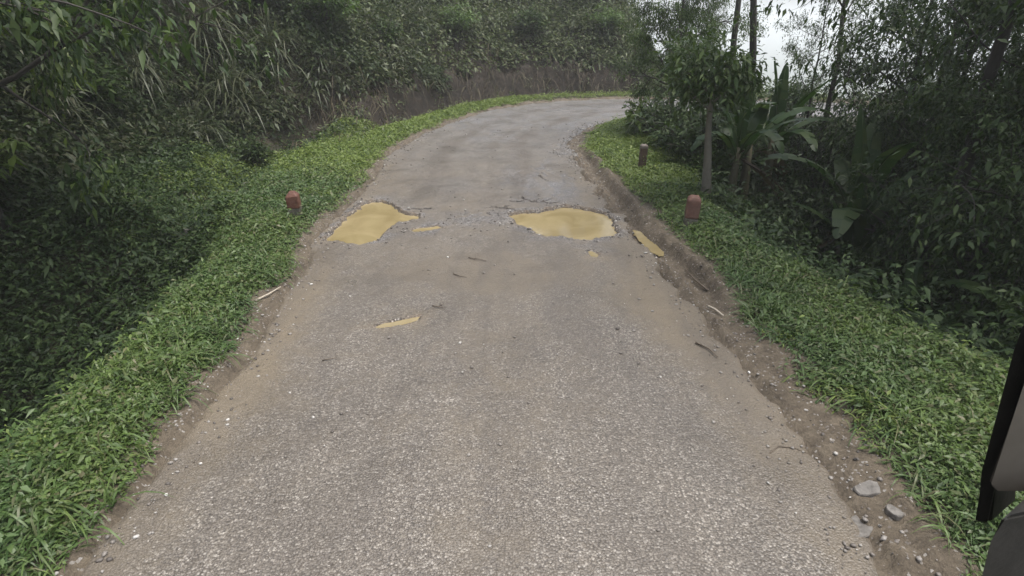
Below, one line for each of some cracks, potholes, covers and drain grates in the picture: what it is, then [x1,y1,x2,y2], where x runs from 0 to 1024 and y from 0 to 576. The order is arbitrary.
pothole [504,203,624,241]
pothole [318,198,425,246]
pothole [584,248,601,258]
crack [486,196,559,210]
pothole [371,314,424,329]
pothole [409,224,443,232]
